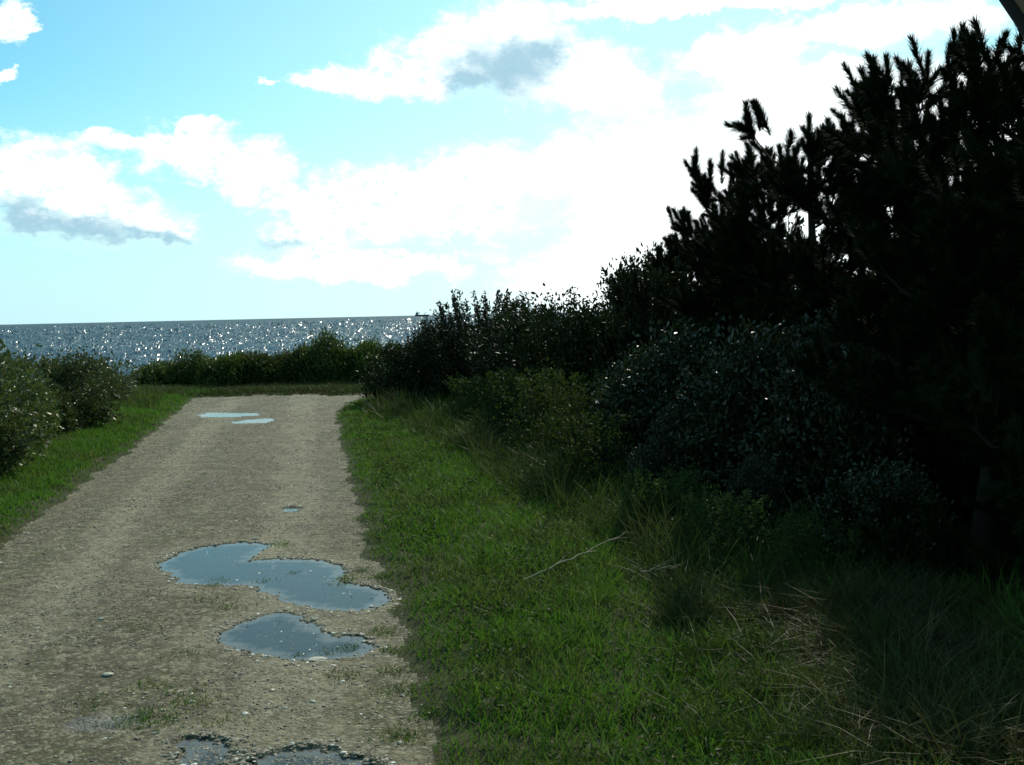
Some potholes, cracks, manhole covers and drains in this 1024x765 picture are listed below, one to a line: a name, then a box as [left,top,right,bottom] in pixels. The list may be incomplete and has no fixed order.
pothole [271,503,303,512]
pothole [145,728,261,765]
pothole [149,540,402,613]
pothole [205,607,389,667]
pothole [223,737,396,765]
